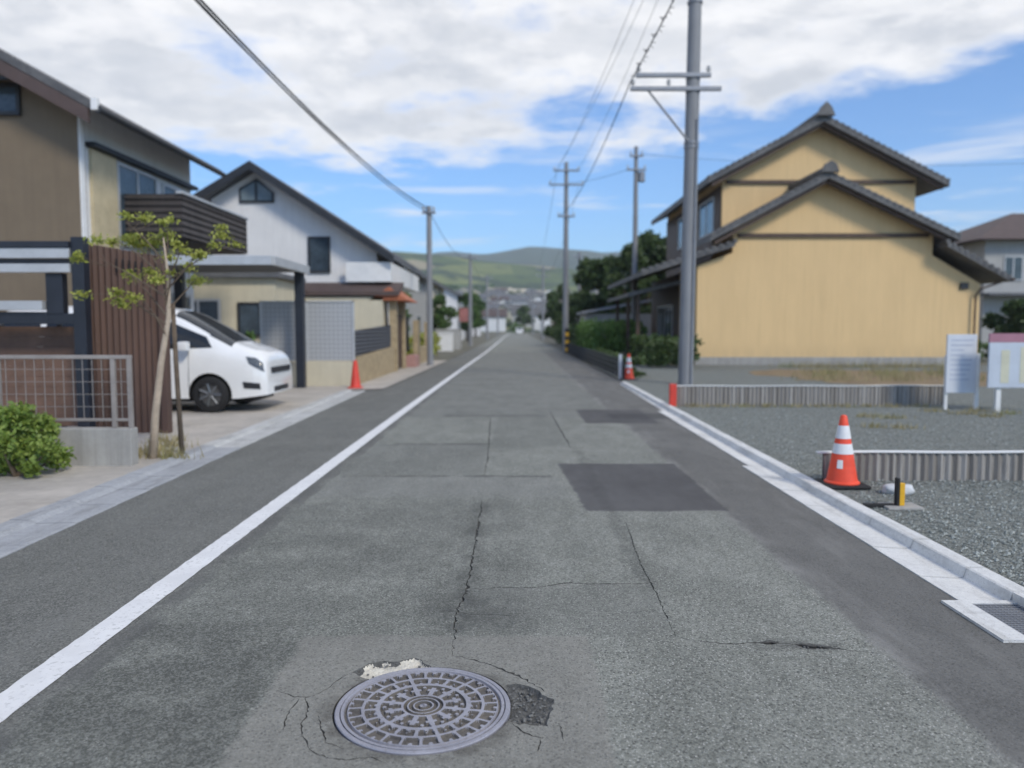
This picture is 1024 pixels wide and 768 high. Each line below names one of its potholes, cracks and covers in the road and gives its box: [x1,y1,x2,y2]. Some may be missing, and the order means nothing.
crack [451,499,874,691]
pothole [506,684,554,726]
manhole cover [332,667,516,756]
crack [283,672,387,764]
